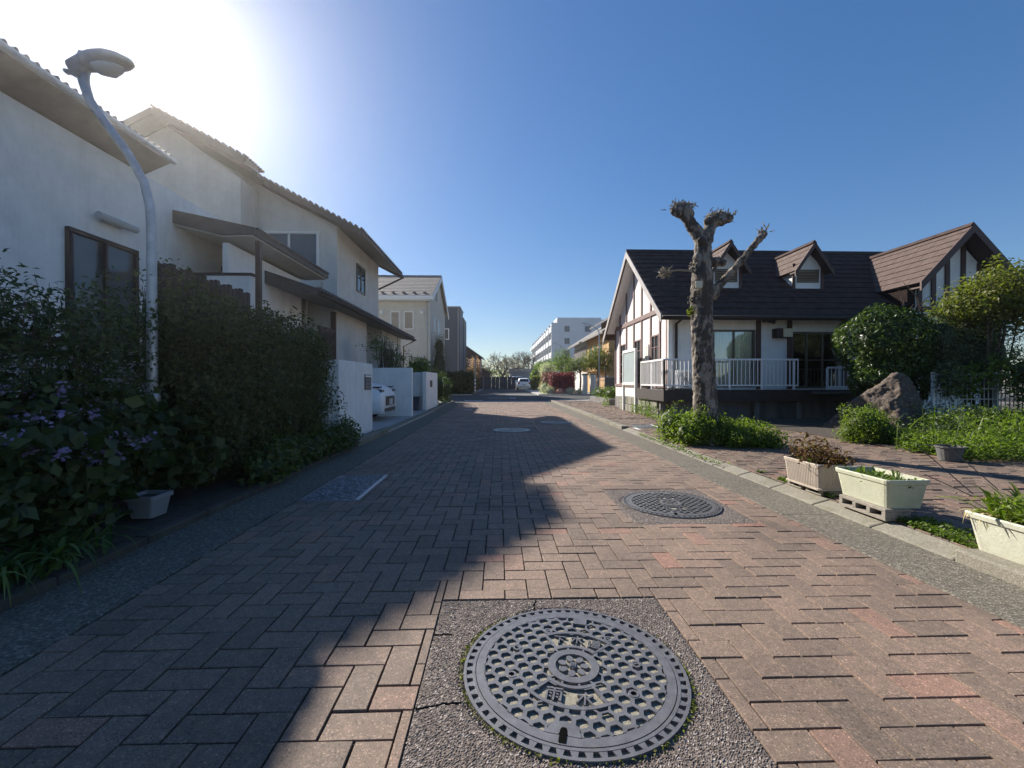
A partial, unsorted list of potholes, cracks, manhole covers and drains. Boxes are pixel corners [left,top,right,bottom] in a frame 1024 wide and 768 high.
manhole cover [623,491,722,519]
crack [415,702,461,710]
manhole cover [464,609,691,765]
